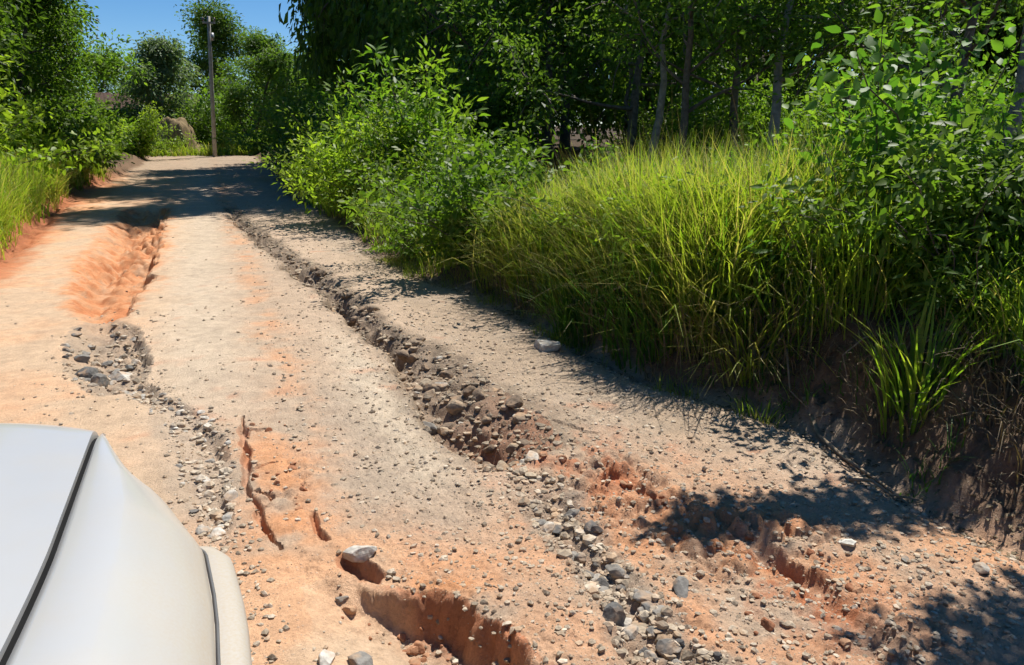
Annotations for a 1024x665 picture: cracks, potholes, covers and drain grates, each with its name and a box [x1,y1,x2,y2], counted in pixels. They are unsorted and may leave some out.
pothole [299,574,558,665]
pothole [59,319,155,398]
crack [308,511,332,542]
crack [235,415,284,550]
pothole [333,553,387,585]
